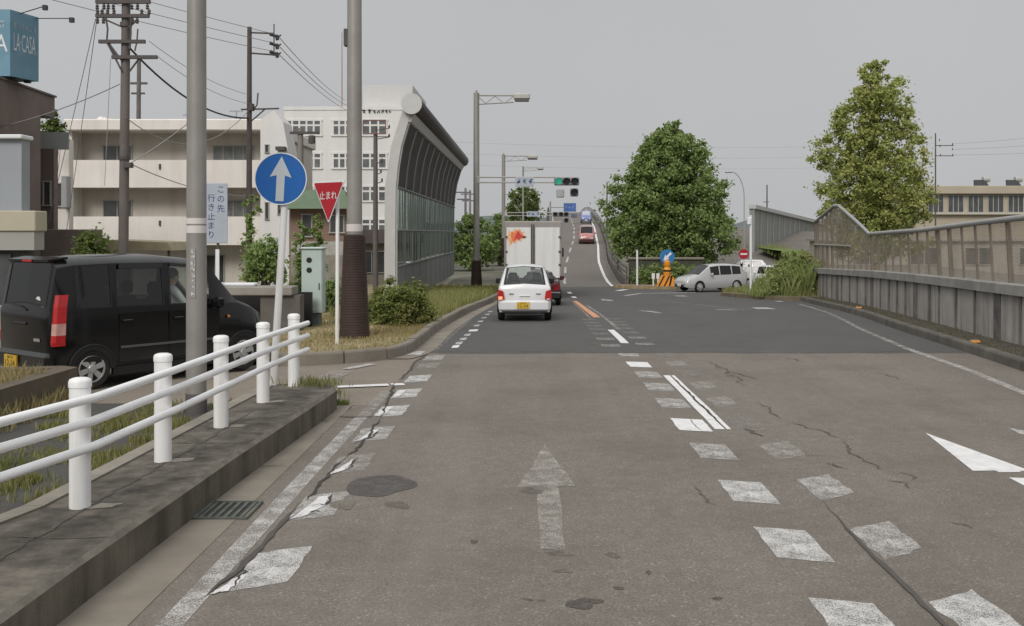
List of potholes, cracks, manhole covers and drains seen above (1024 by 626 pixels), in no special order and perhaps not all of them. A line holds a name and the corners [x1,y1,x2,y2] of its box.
crack [744,402,917,487]
crack [198,353,428,600]
drain grate [192,501,263,520]
